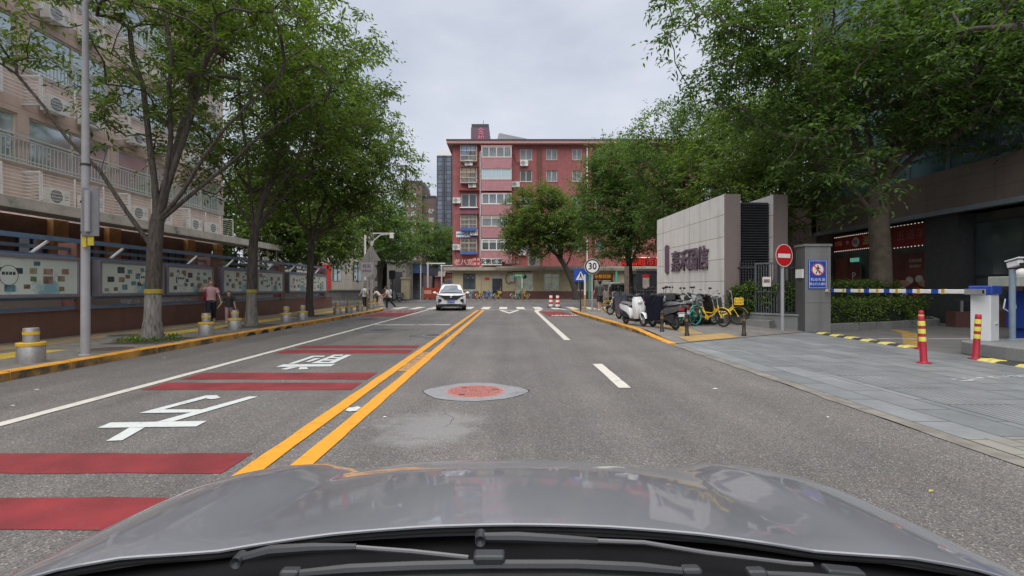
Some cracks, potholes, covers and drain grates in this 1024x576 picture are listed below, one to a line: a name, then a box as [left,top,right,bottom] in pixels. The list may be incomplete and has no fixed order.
manhole cover [422,382,529,402]
